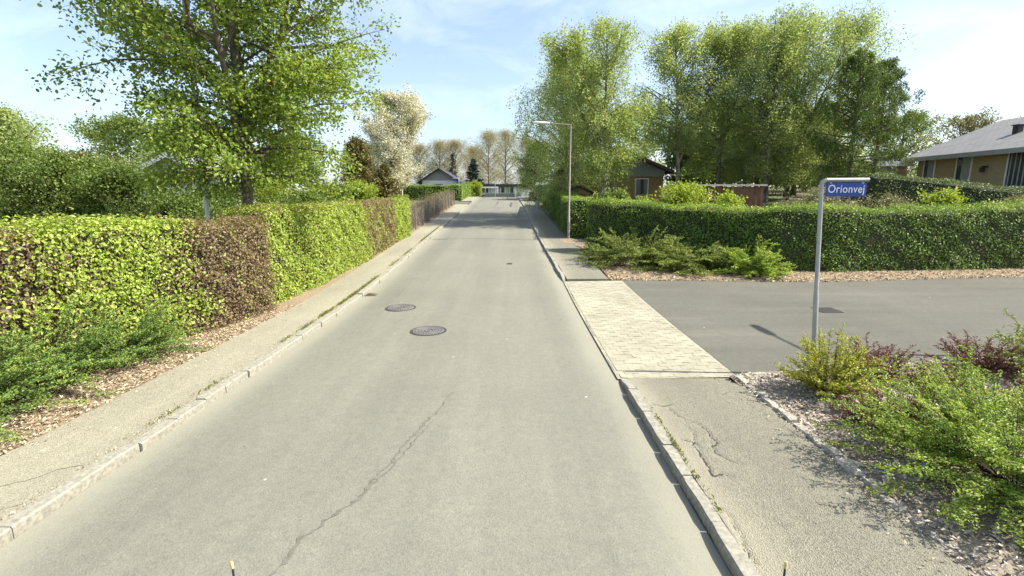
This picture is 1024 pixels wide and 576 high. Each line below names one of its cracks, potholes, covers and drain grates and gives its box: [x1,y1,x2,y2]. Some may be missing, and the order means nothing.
manhole cover [410,326,447,336]
crack [268,392,453,576]
manhole cover [385,304,416,312]
crack [667,405,738,476]
